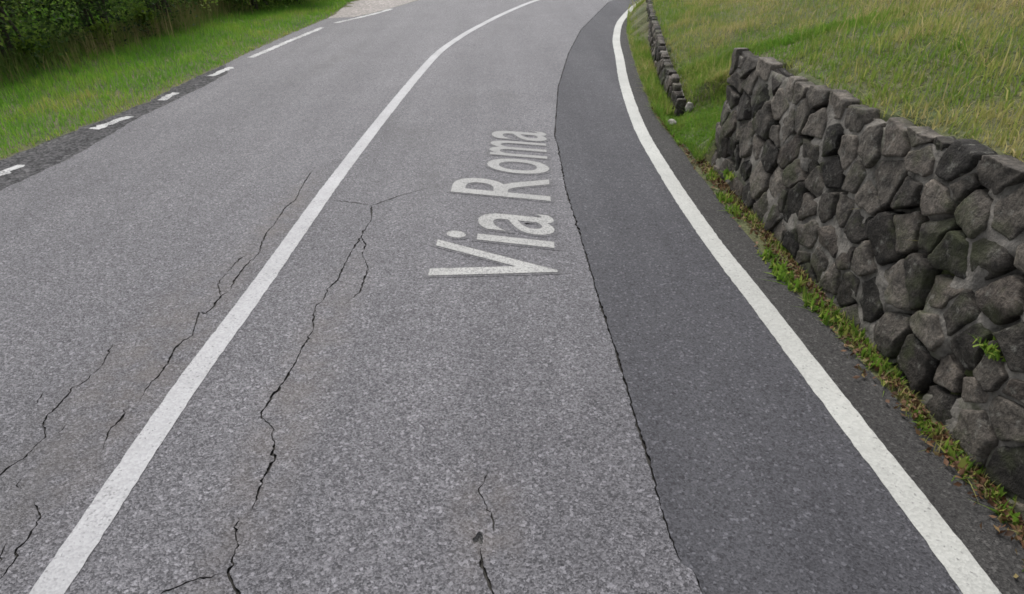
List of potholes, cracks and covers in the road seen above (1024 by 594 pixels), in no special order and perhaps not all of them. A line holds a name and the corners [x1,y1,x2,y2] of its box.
crack [161,191,416,594]
crack [102,173,311,451]
crack [0,343,113,579]
crack [478,470,495,594]
